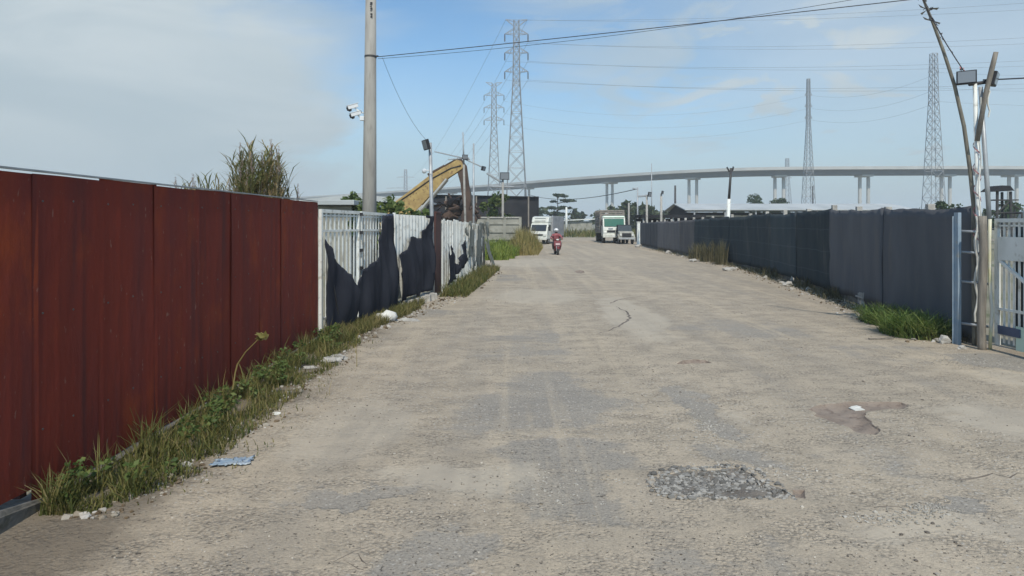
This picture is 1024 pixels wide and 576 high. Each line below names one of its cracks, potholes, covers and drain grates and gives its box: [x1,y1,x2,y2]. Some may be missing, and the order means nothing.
crack [600,298,631,333]
pothole [655,468,791,498]
